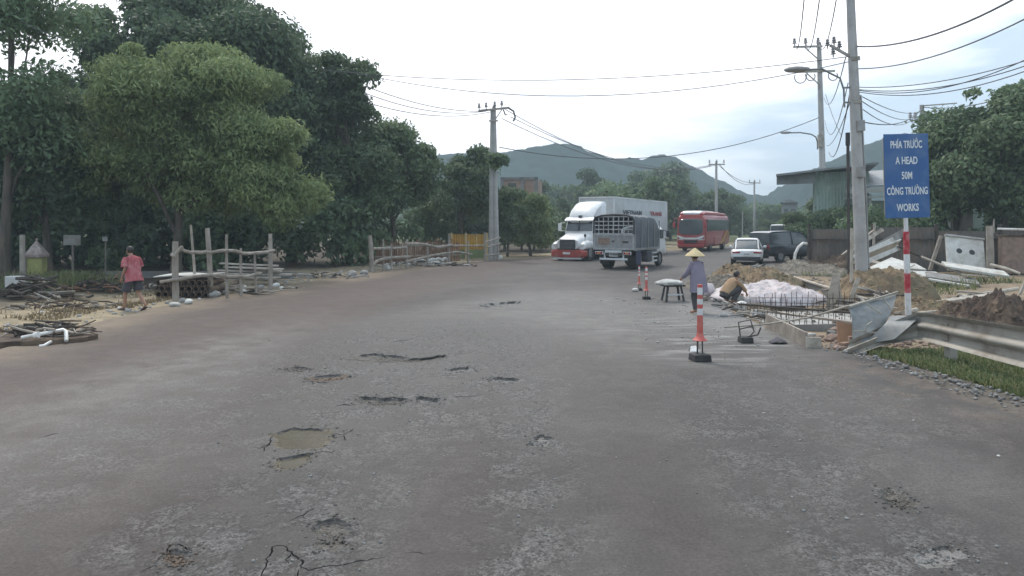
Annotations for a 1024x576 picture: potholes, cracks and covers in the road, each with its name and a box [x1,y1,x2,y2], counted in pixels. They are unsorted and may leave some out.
pothole [482,374,529,384]
pothole [445,366,482,375]
crack [261,545,384,576]
pothole [474,300,524,309]
pothole [302,504,359,558]
pothole [410,394,446,405]
pothole [262,425,347,456]
pothole [348,393,420,408]
pothole [874,483,933,514]
pothole [524,431,554,453]
pothole [340,351,449,365]
pothole [302,372,358,383]
